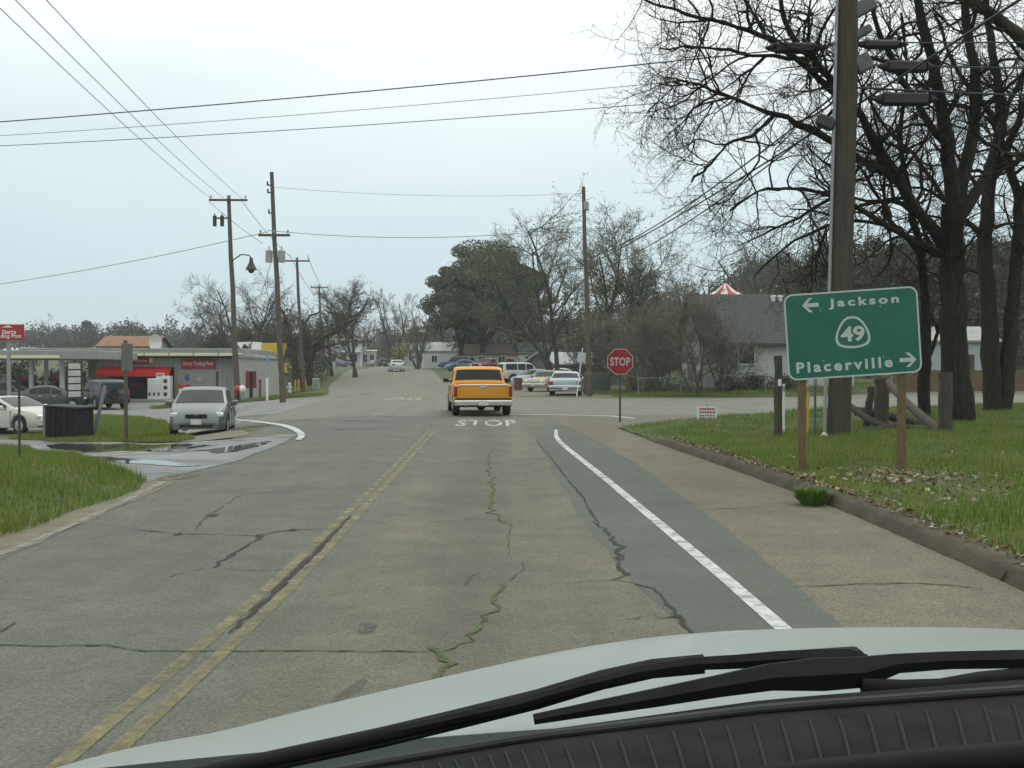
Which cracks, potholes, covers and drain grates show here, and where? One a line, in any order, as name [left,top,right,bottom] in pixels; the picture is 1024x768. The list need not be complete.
crack [545,516,627,586]
crack [0,448,525,679]
